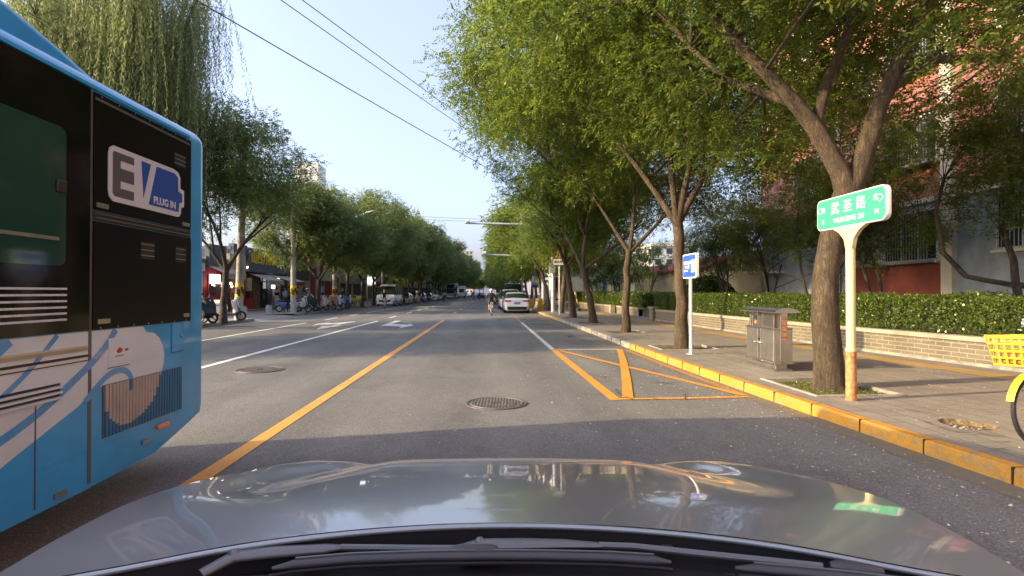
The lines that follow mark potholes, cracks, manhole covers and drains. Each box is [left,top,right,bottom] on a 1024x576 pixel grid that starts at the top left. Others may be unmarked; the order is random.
manhole cover [465,397,527,410]
pothole [937,418,1000,431]
